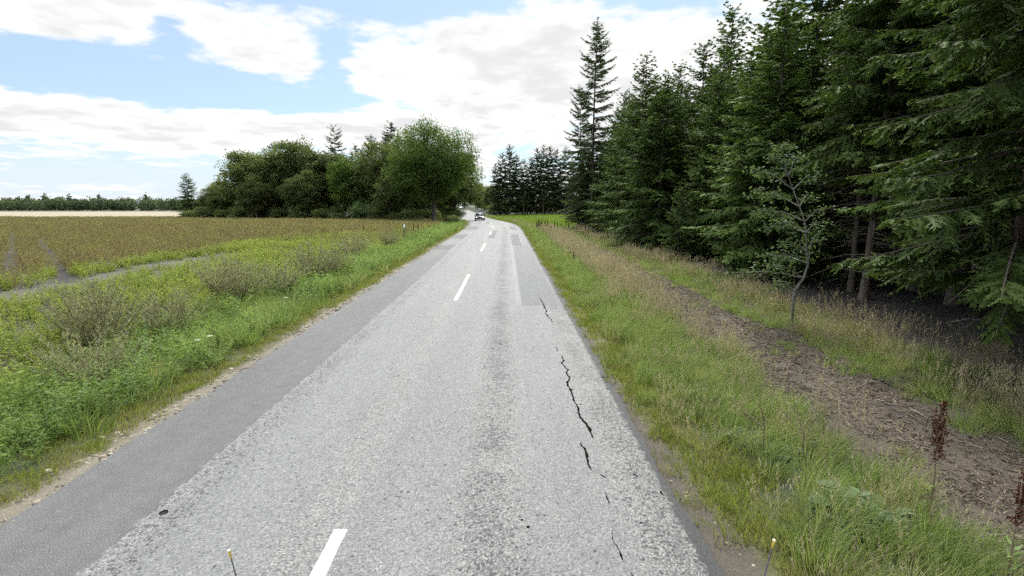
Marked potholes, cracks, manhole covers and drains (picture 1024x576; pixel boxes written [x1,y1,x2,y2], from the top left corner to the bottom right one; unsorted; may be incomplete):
crack [556,347,611,505]
